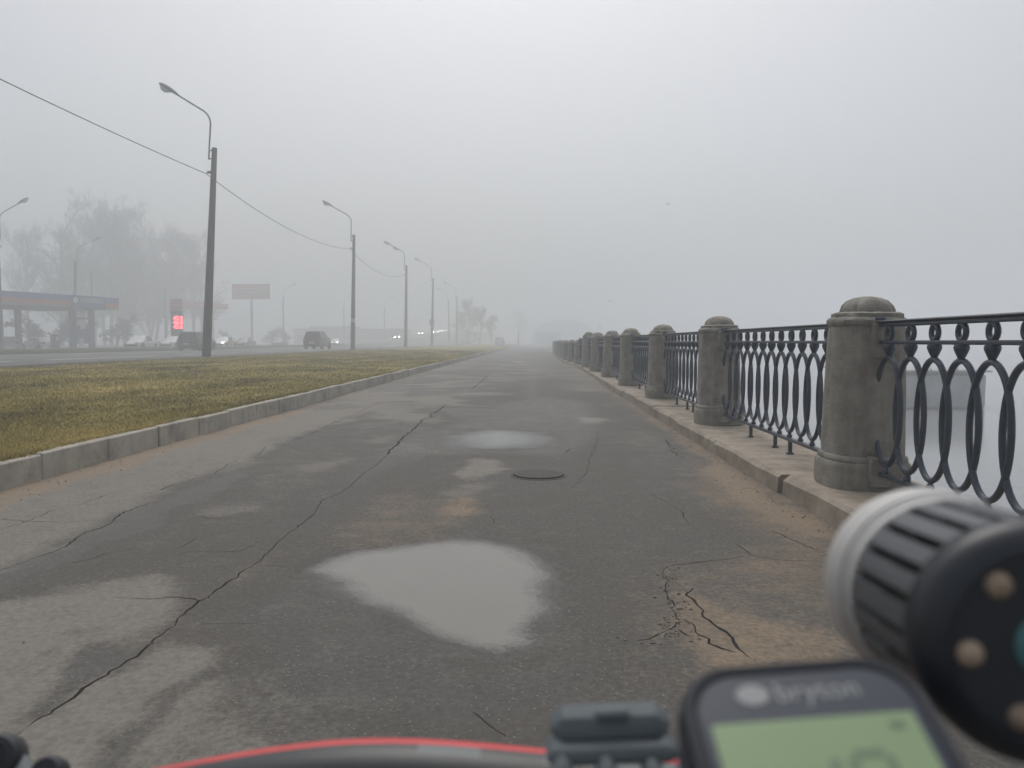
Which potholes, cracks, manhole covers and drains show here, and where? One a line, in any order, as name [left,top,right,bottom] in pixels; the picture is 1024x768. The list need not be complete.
crack [18,375,488,734]
crack [615,531,823,659]
manhole cover [510,469,567,480]
